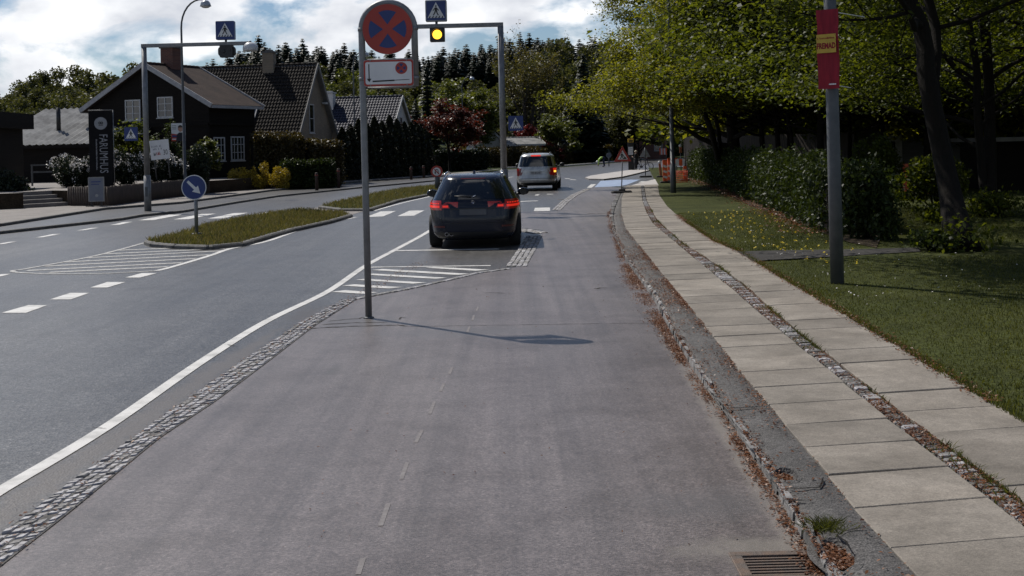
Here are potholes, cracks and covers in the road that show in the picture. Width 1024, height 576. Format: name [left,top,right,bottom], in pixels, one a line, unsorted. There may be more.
drain grate [728,550,826,576]
